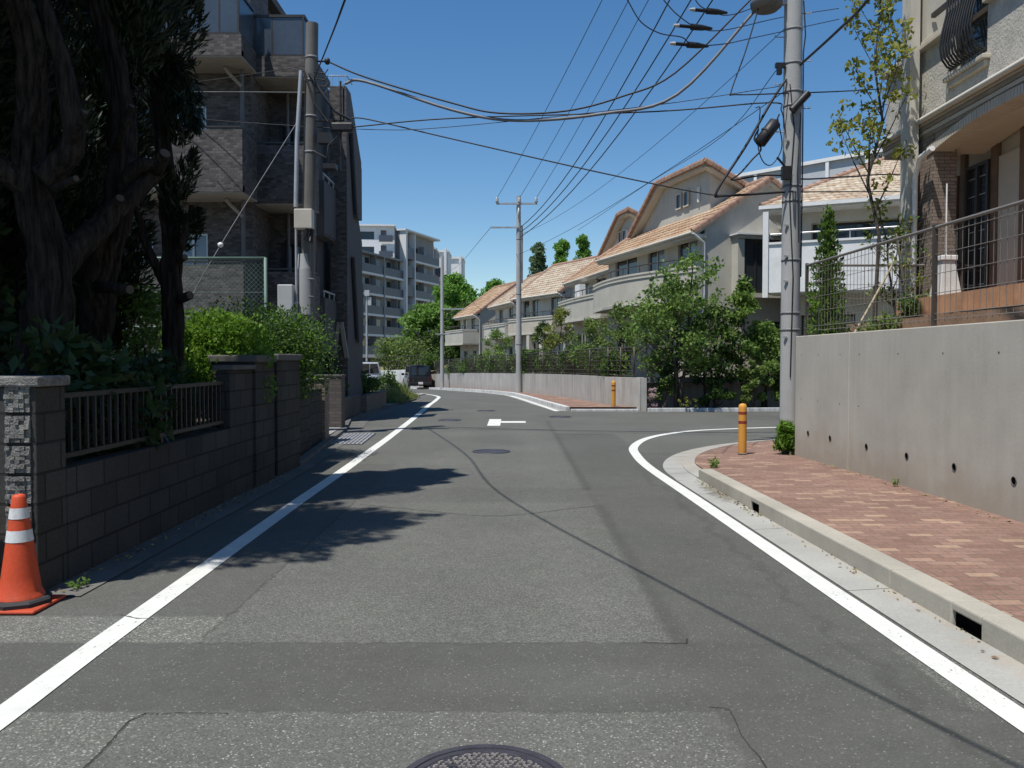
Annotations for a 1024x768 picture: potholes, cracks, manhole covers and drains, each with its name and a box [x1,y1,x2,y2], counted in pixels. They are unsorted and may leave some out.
crack [83,712,227,768]
manhole cover [407,744,563,768]
drain grate [330,433,376,444]
crack [709,706,767,768]
